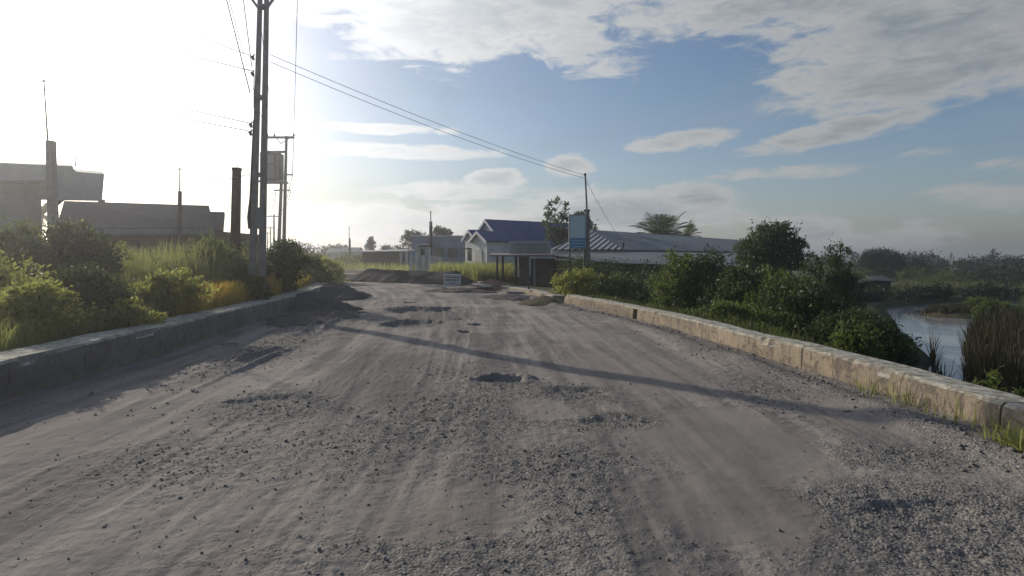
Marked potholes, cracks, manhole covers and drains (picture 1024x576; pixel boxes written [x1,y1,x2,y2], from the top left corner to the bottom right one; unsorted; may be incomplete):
pothole [214,393,318,412]
pothole [383,306,461,314]
pothole [470,373,527,383]
pothole [573,412,670,429]
pothole [375,319,451,328]
